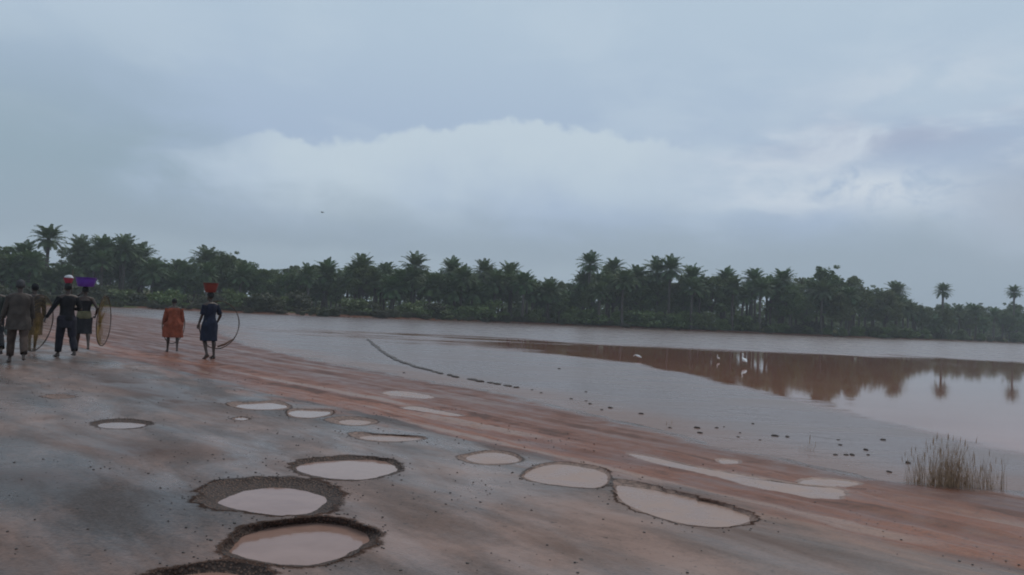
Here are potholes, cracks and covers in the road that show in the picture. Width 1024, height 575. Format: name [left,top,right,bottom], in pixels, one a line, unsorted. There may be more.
pothole [289,455,403,481]
pothole [91,419,152,429]
pothole [222,516,382,567]
pothole [612,479,758,528]
pothole [287,409,333,418]
pothole [457,450,523,465]
pothole [227,400,291,410]
pothole [192,477,345,516]
pothole [324,416,378,426]
pothole [148,561,274,575]
pothole [521,462,611,488]
pothole [348,432,426,442]
